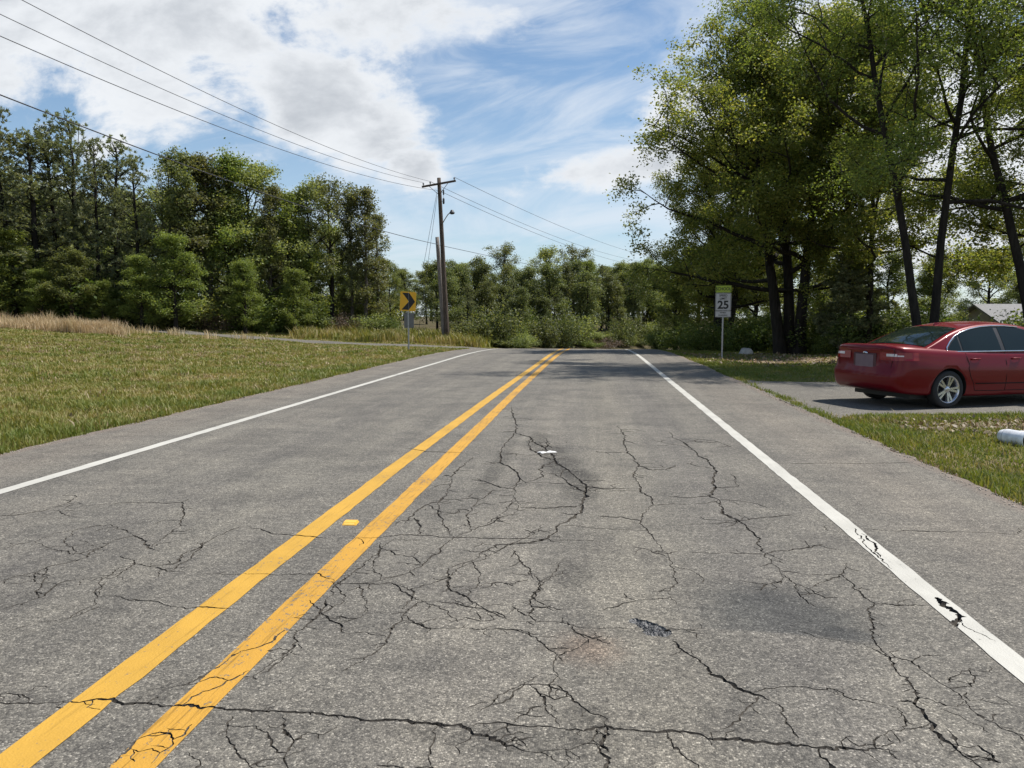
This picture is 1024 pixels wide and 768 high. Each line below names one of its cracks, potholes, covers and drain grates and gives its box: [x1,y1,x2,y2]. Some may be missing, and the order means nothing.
crack [0,408,1024,768]
pothole [629,618,672,637]
